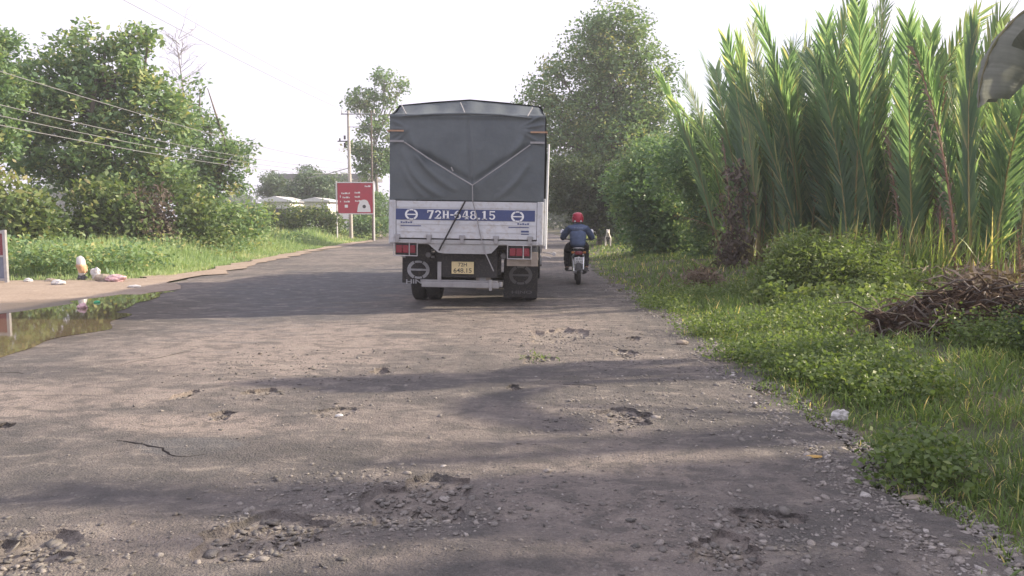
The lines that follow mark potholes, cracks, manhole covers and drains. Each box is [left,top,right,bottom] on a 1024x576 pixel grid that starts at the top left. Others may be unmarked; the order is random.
pothole [727,506,809,529]
pothole [611,349,642,359]
crack [116,440,204,457]
pothole [590,407,661,426]
pothole [527,327,590,345]
pothole [0,529,85,576]
pothole [358,473,472,528]
pothole [208,411,237,421]
pothole [684,529,766,576]
pothole [167,390,201,400]
